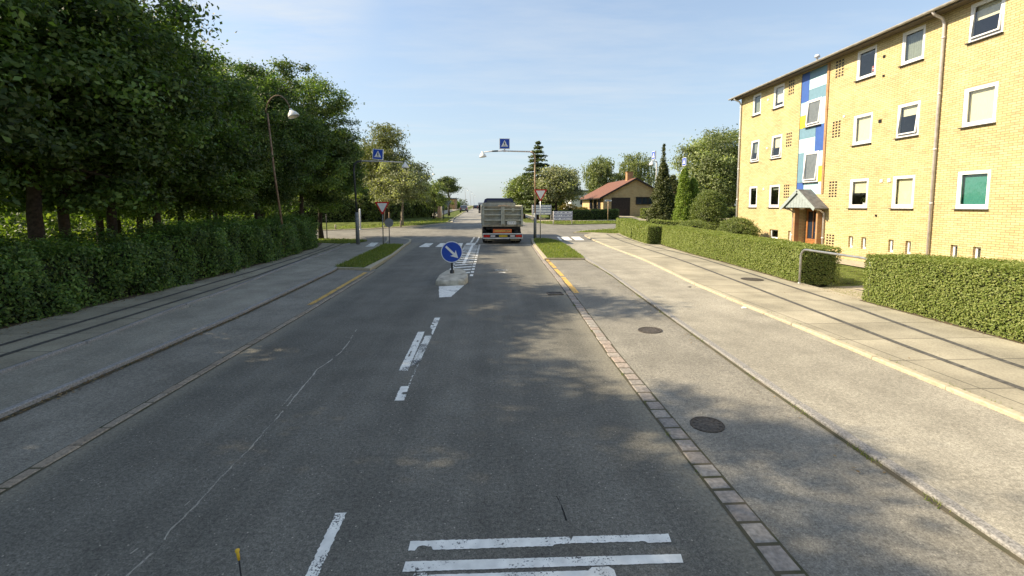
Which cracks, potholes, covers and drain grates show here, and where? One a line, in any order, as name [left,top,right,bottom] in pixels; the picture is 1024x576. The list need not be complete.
manhole cover [690,416,725,433]
